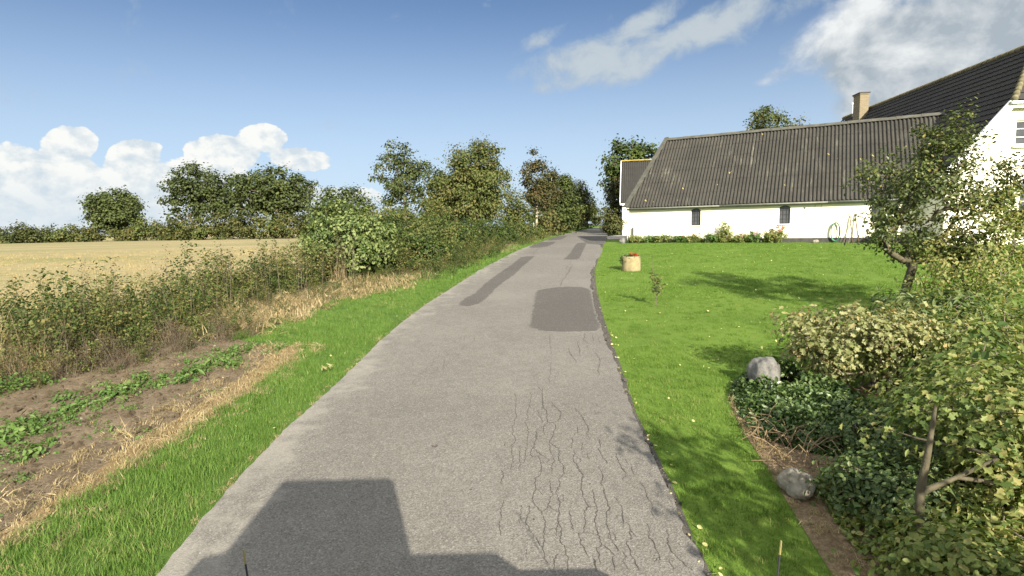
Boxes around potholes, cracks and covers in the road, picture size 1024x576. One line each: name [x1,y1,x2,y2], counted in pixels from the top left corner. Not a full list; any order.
crack [499,369,693,570]
